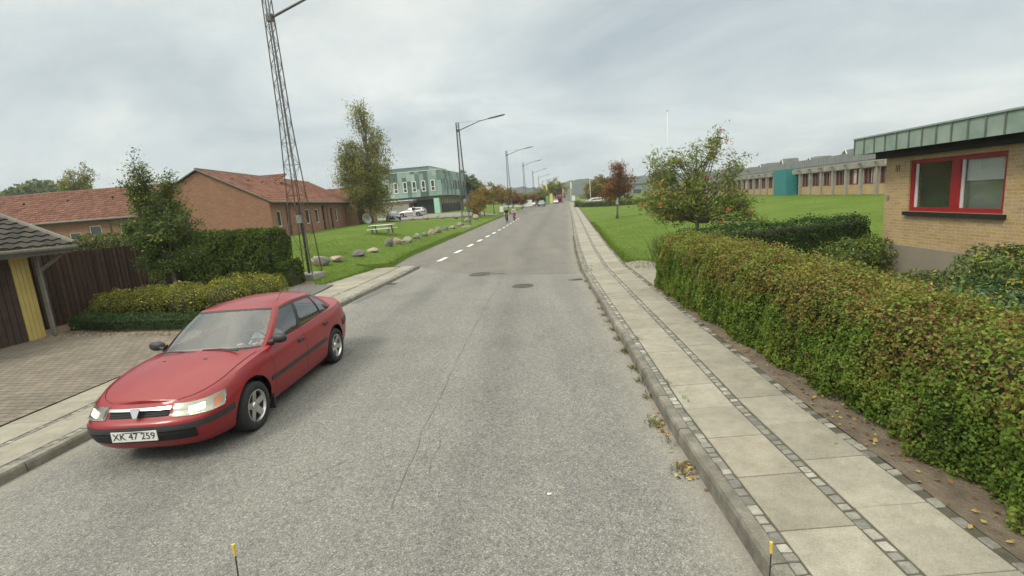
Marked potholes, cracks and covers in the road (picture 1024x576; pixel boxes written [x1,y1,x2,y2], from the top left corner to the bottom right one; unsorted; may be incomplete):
crack [391,273,505,508]
